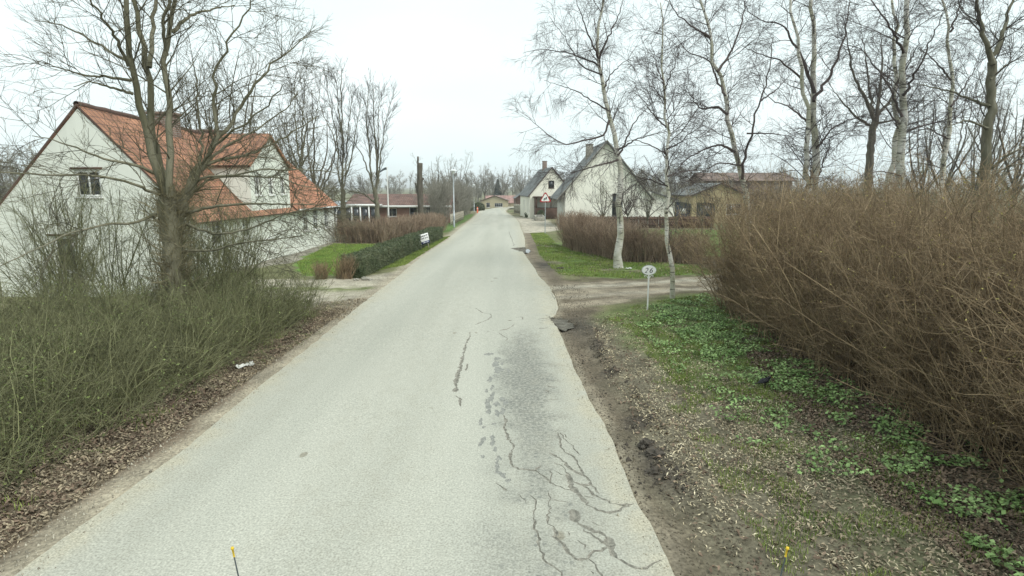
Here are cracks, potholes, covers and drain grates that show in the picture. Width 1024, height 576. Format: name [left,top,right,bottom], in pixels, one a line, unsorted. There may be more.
crack [452,308,661,576]
